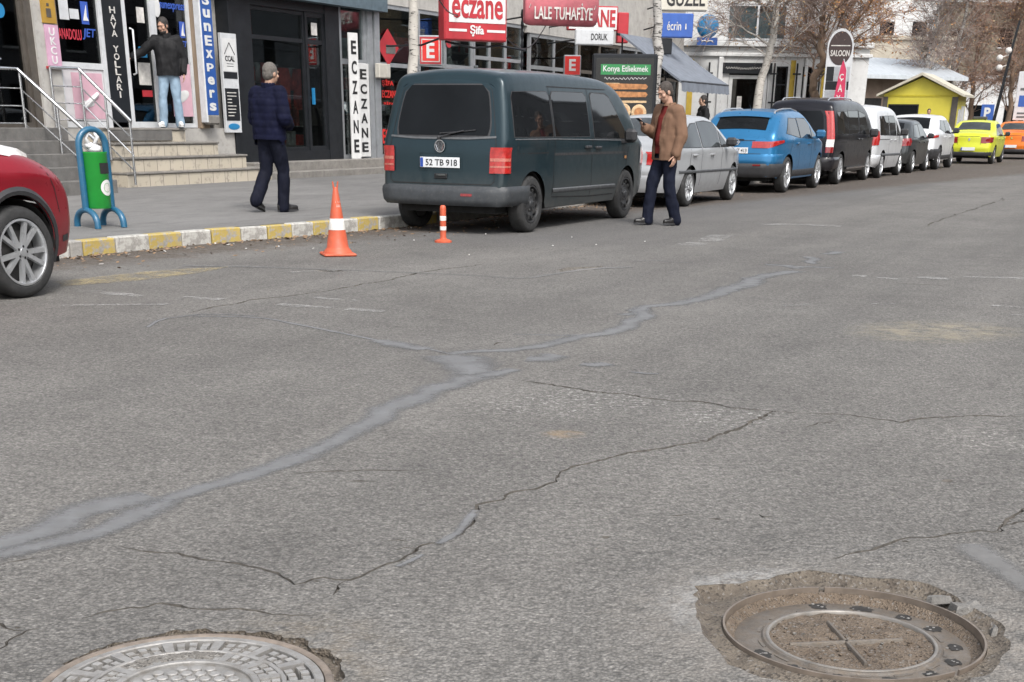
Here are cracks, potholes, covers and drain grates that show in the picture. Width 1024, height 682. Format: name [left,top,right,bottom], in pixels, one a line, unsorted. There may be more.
manhole cover [722,587,987,682]
crack [121,380,1019,595]
manhole cover [42,634,334,682]
crack [926,198,1003,227]
